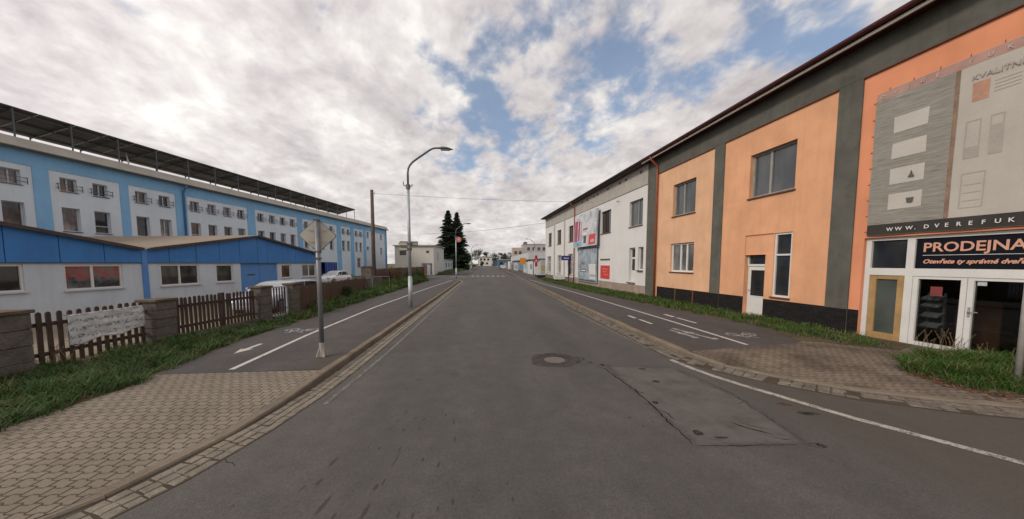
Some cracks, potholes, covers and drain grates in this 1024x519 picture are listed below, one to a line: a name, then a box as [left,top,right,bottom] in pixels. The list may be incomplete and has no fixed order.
manhole cover [532,353,581,367]
